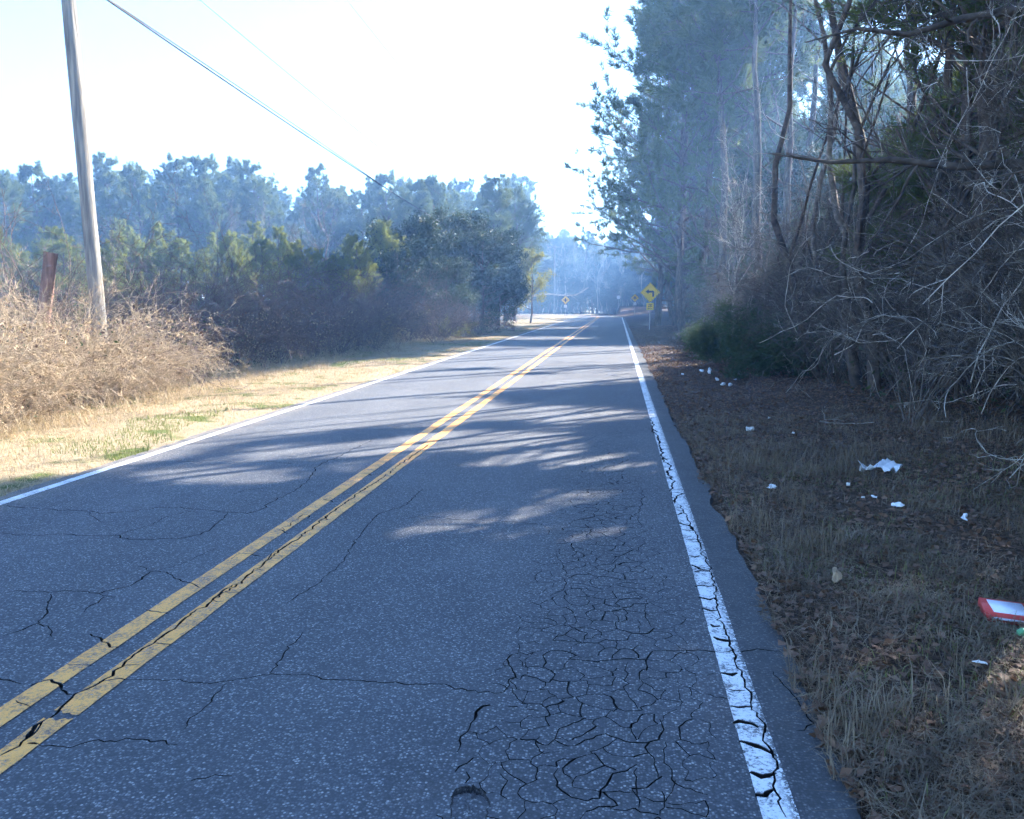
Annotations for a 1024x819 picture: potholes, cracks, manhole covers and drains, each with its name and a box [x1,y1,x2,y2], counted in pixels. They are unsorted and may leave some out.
crack [0,419,815,819]
pothole [450,784,491,819]
